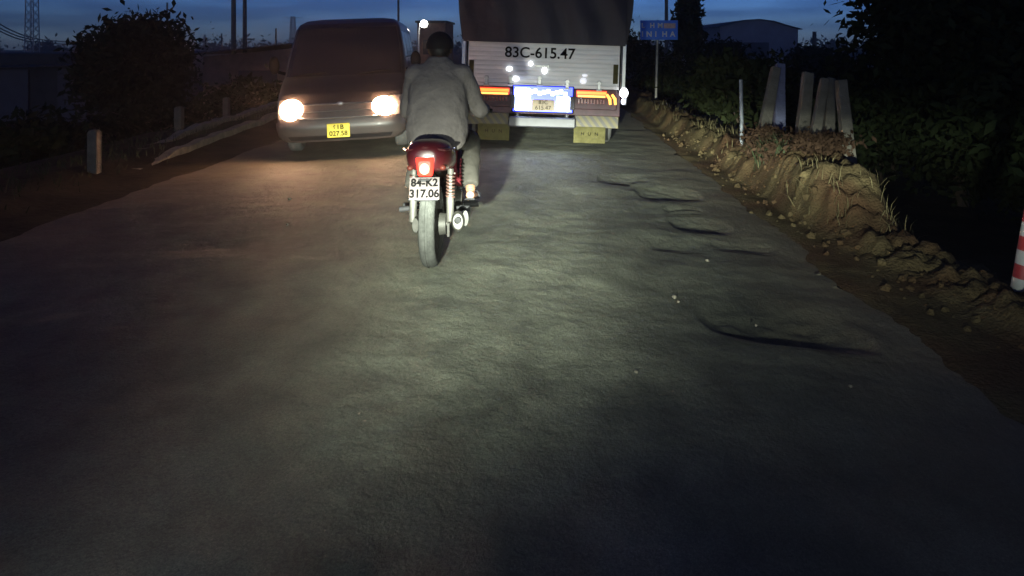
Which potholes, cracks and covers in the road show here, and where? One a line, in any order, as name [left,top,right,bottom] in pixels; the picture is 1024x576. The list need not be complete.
pothole [689,296,896,364]
pothole [645,233,705,254]
pothole [664,211,740,238]
pothole [629,181,708,203]
